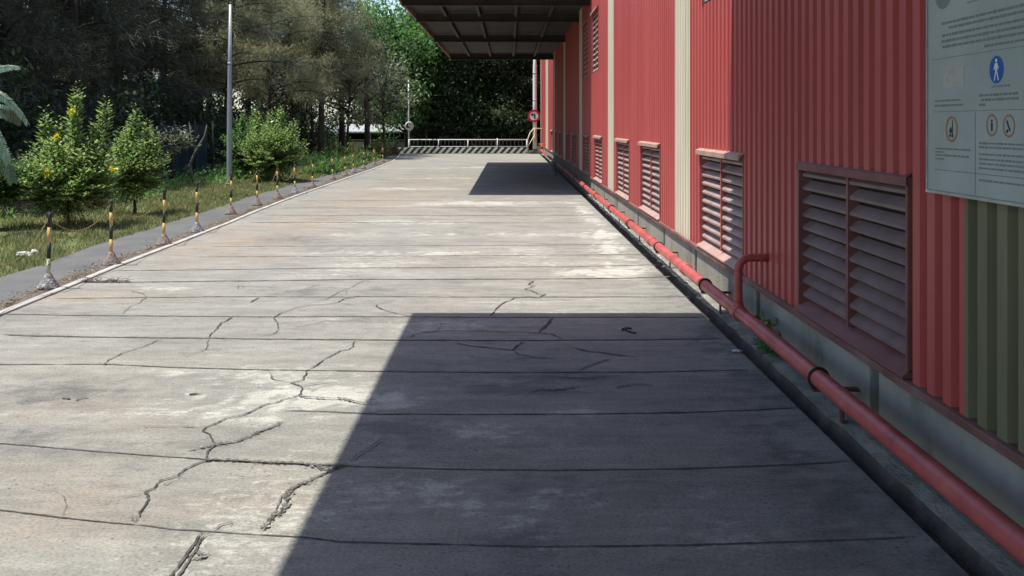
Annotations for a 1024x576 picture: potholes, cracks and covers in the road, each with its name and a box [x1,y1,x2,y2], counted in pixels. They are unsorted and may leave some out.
crack [261,280,653,391]
crack [169,521,232,576]
crack [91,342,385,530]
